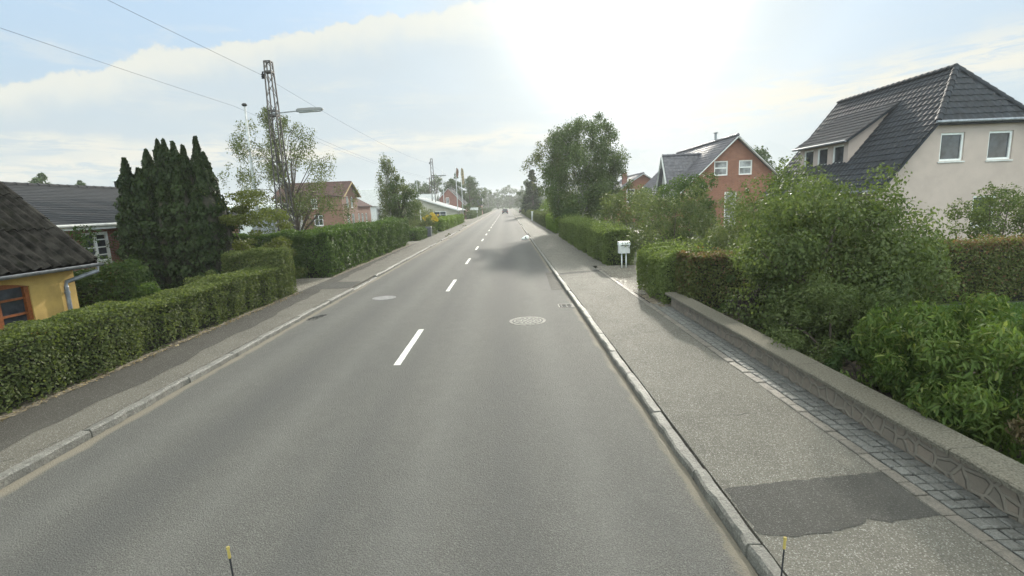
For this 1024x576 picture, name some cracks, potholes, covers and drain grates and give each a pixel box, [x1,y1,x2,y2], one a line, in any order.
manhole cover [509,317,546,325]
